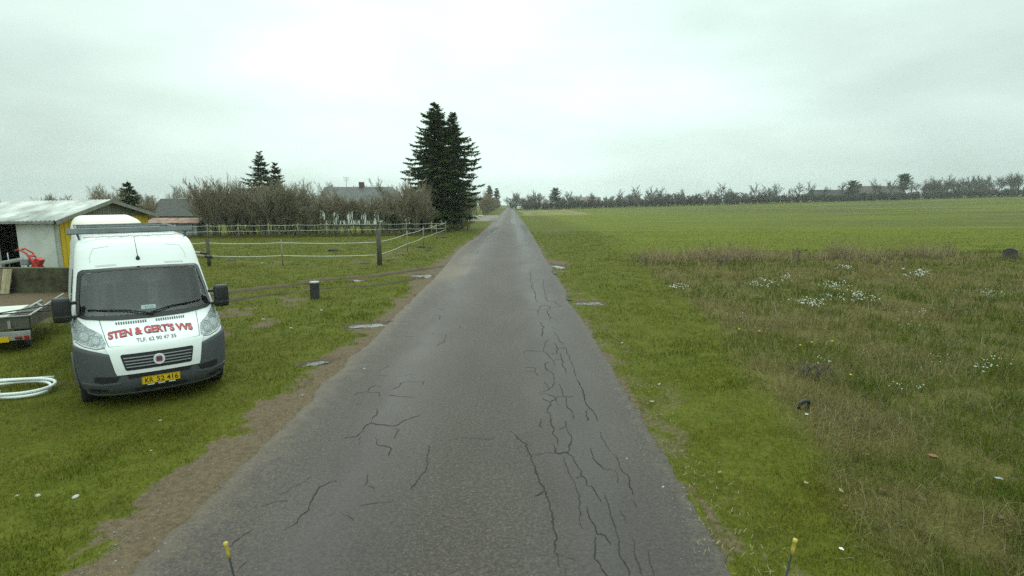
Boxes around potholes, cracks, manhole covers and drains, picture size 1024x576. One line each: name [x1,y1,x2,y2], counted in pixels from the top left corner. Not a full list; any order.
crack [514,274,654,576]
crack [345,368,424,455]
